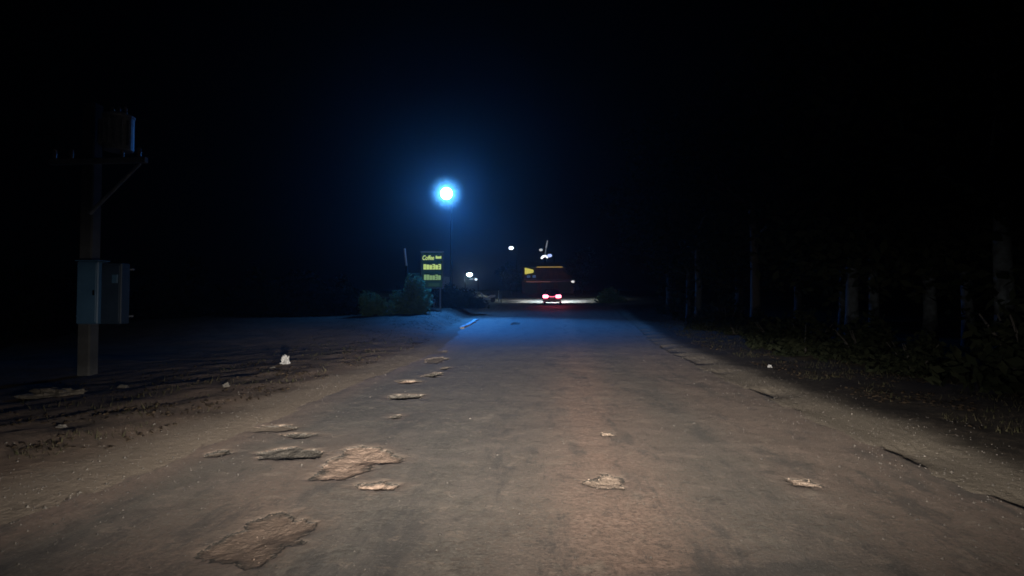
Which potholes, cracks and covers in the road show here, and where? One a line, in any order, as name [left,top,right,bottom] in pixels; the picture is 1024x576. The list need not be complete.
pothole [786,478,824,488]
pothole [255,447,328,461]
pothole [193,512,318,571]
pothole [354,481,399,491]
pothole [308,446,404,481]
pothole [582,474,626,490]
